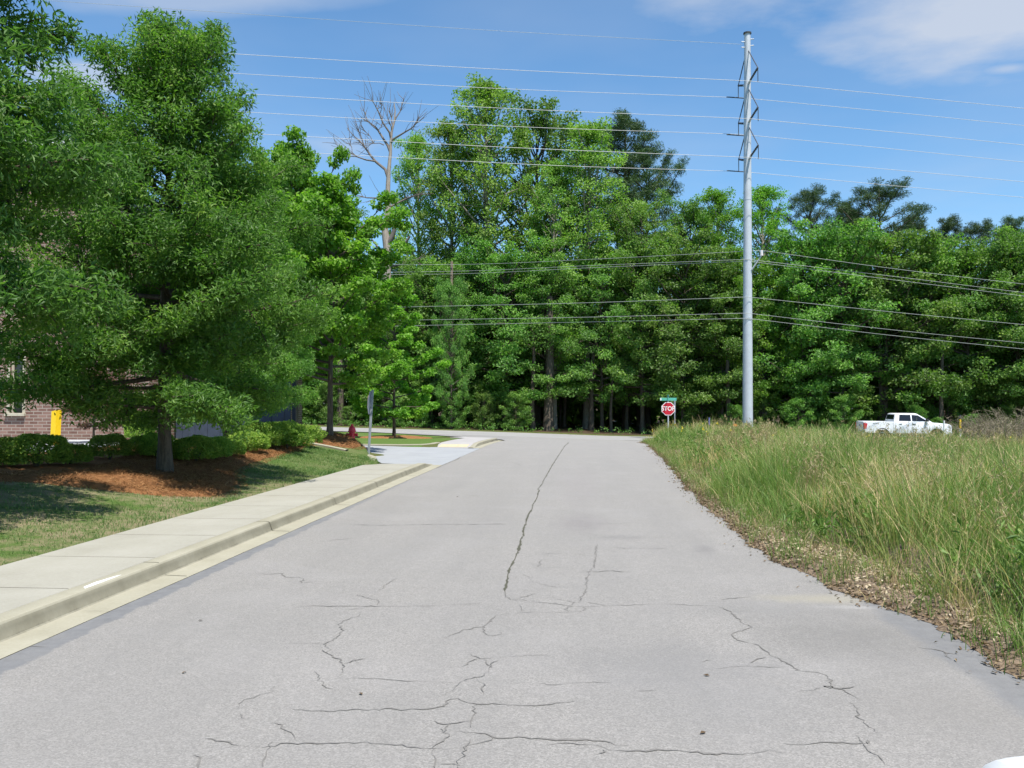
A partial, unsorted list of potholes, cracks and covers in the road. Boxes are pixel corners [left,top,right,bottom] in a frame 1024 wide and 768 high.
crack [524,537,627,603]
crack [705,597,884,762]
crack [195,580,779,768]
